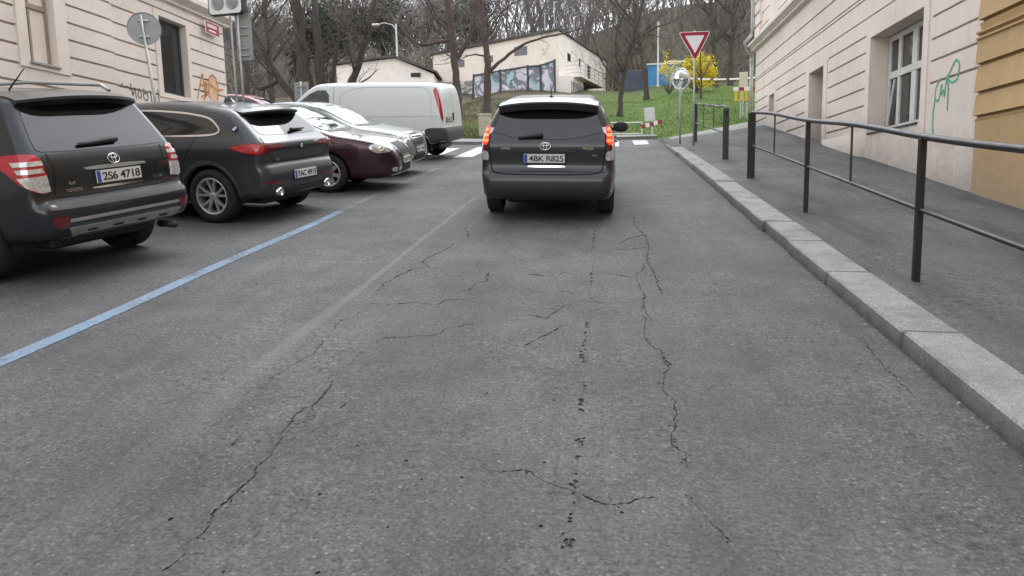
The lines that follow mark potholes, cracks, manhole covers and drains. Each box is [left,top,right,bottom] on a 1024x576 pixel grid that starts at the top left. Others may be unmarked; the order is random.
crack [162,229,489,571]
crack [609,214,691,475]
crack [859,337,916,397]
crack [472,231,659,549]
crack [685,495,729,543]
